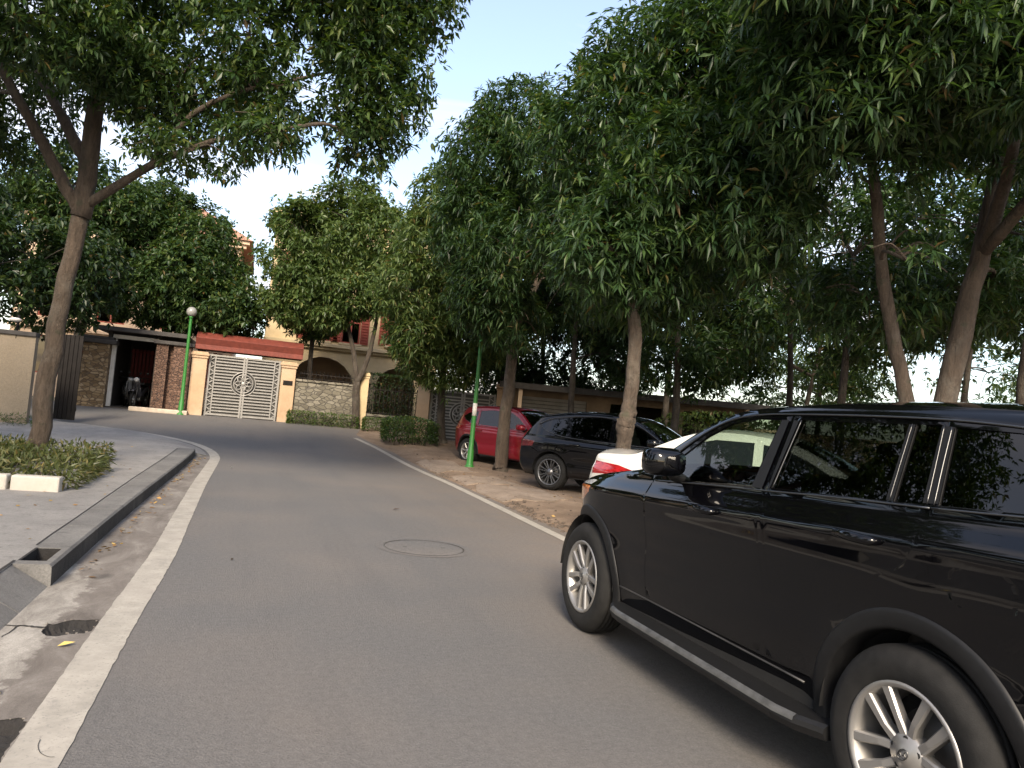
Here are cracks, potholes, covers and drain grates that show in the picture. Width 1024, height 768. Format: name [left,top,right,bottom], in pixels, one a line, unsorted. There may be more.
pothole [41,619,99,636]
pothole [0,717,27,763]
manhole cover [375,538,472,557]
